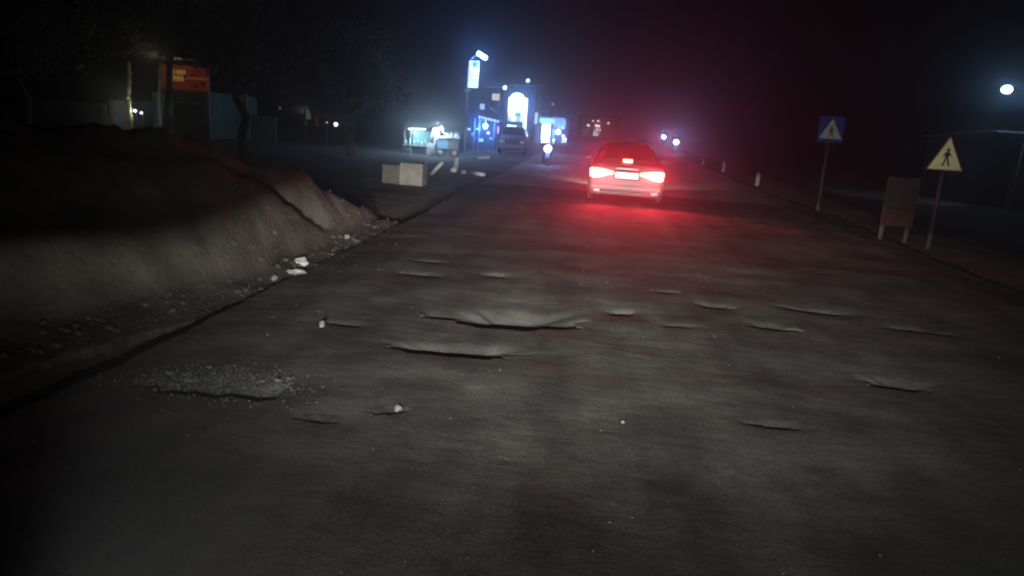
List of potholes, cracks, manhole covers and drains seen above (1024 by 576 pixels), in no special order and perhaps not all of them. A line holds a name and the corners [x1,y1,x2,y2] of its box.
pothole [324,320,370,328]
pothole [849,374,943,394]
pothole [689,300,739,310]
pothole [138,367,292,402]
pothole [742,320,804,333]
pothole [366,402,413,415]
pothole [417,307,593,332]
pothole [772,303,860,317]
pothole [736,419,808,431]
pothole [378,339,540,360]
pothole [290,412,341,424]
pothole [880,324,962,337]
